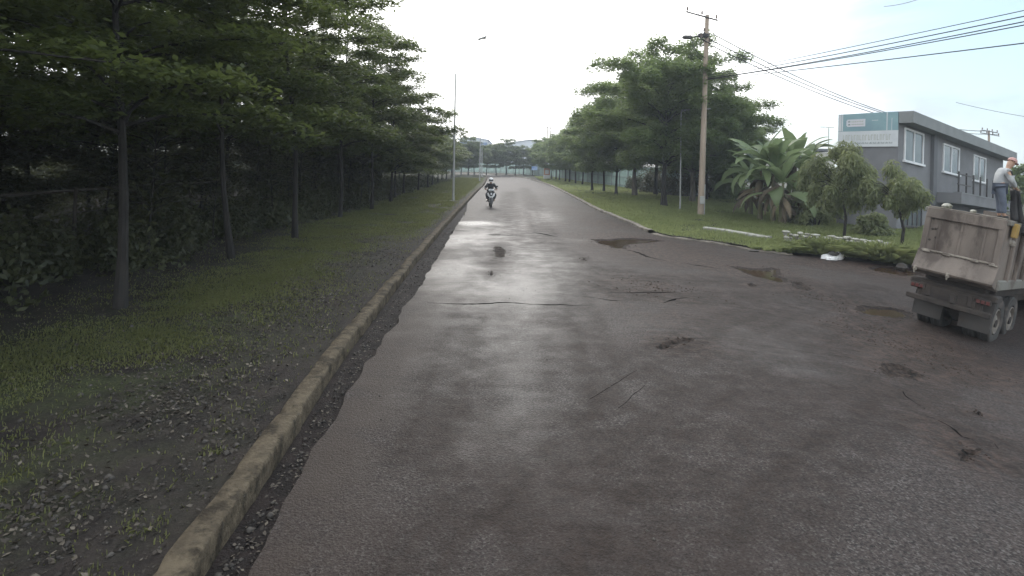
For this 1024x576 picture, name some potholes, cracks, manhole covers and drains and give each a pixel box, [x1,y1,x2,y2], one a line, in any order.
pothole [591,237,662,249]
pothole [957,447,991,462]
pothole [656,337,707,350]
pothole [846,305,914,321]
pothole [730,266,793,283]
pothole [868,362,930,381]
pothole [492,246,511,258]
crack [591,292,681,303]
crack [903,392,999,449]
